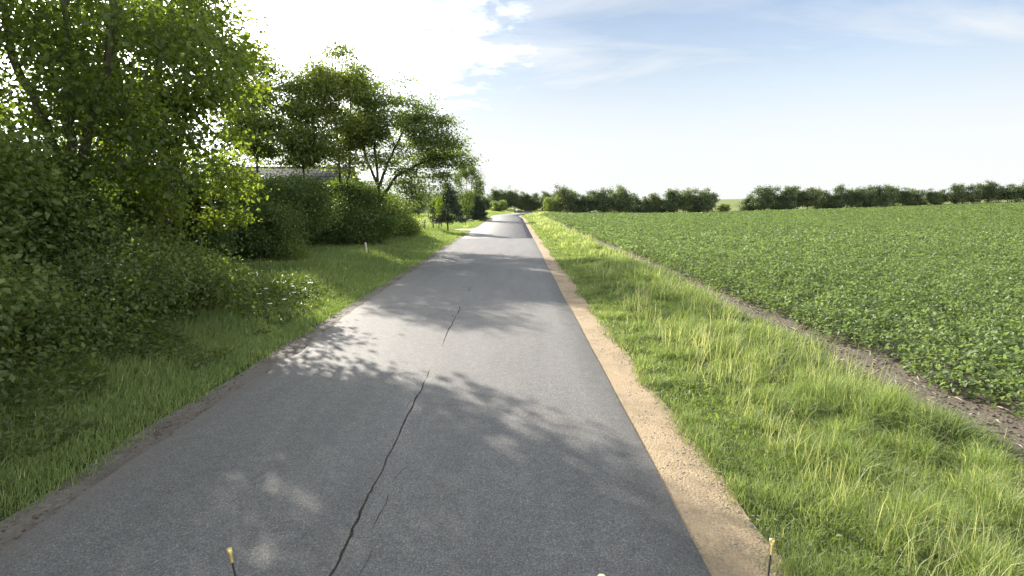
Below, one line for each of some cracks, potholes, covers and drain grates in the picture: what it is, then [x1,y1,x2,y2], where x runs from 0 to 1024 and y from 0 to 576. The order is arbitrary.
crack [328,368,431,576]
